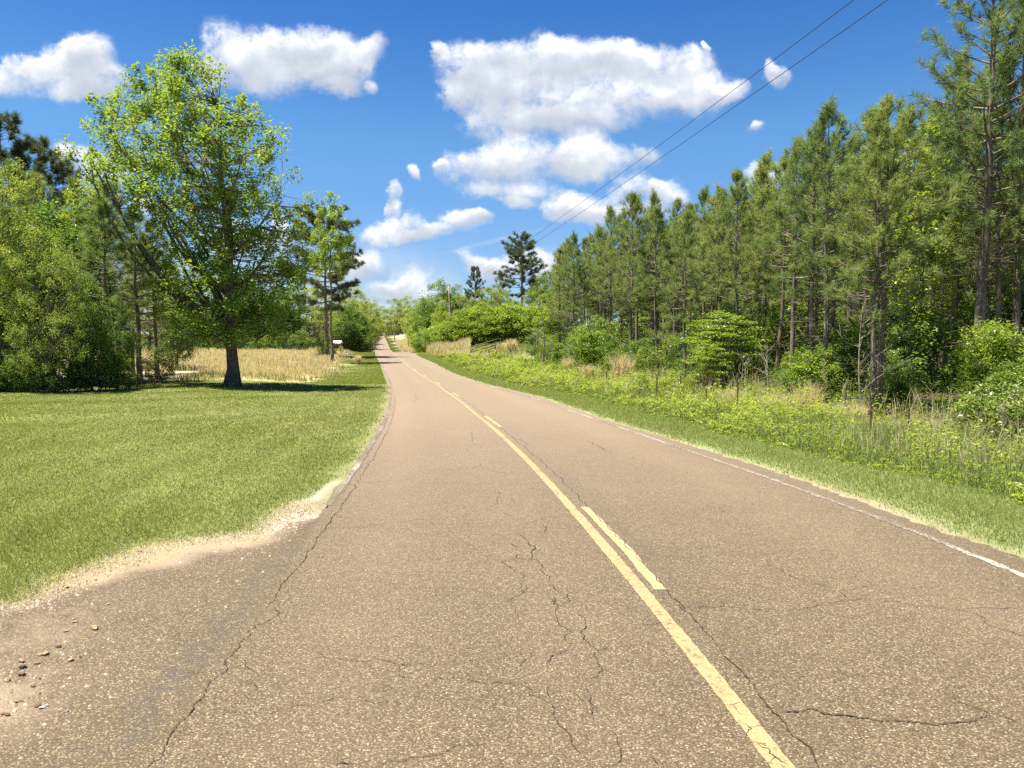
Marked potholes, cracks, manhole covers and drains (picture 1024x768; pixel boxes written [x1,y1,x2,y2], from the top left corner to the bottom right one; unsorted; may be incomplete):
crack [319,371,622,766]
crack [655,702,789,765]
crack [786,699,1023,725]
